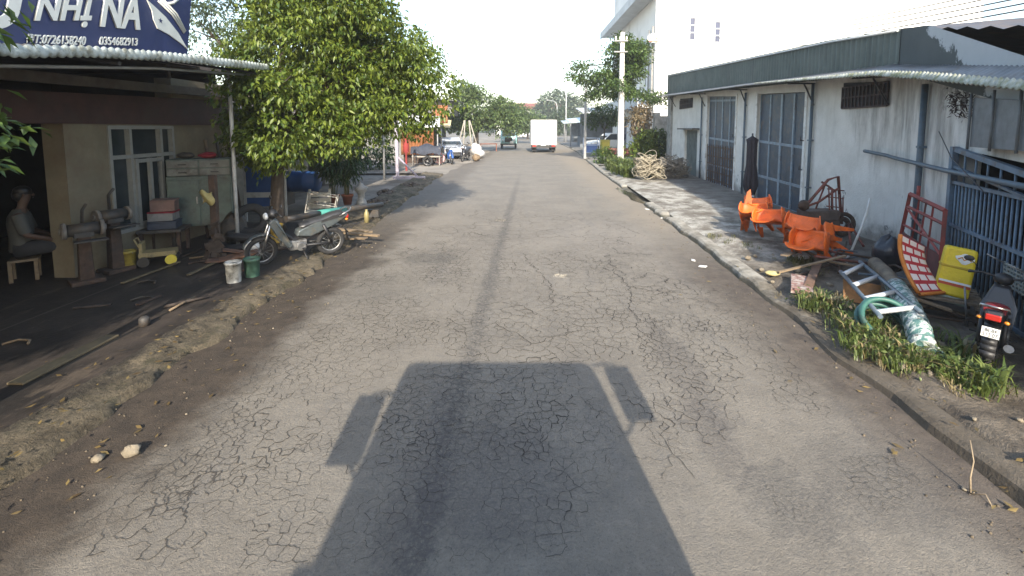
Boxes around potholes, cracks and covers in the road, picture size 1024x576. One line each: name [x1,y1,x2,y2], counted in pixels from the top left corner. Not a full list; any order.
crack [64,207,830,569]
